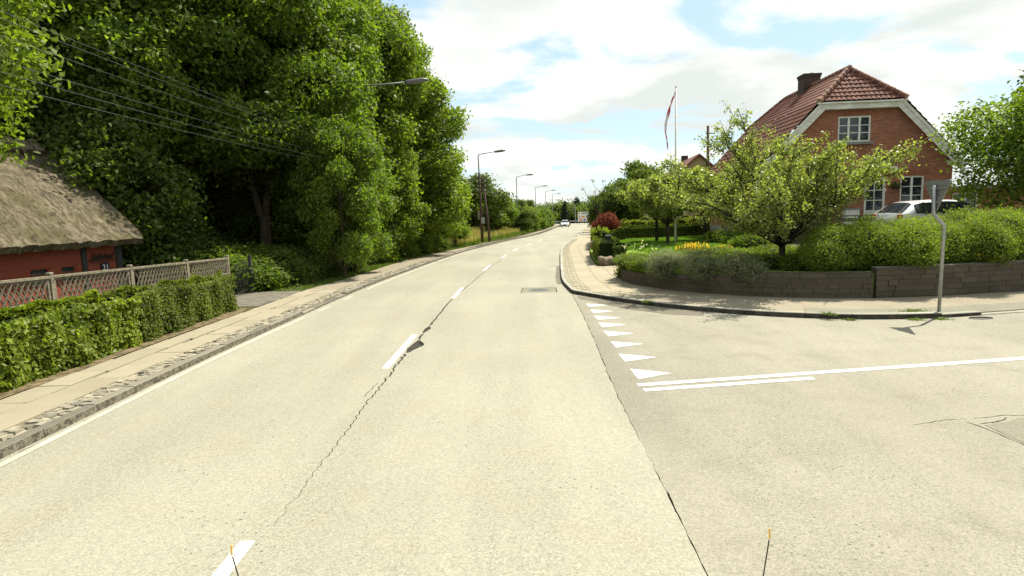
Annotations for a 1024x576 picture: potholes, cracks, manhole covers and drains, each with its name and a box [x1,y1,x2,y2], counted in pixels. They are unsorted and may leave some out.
crack [271,258,503,527]
pothole [406,340,424,353]
